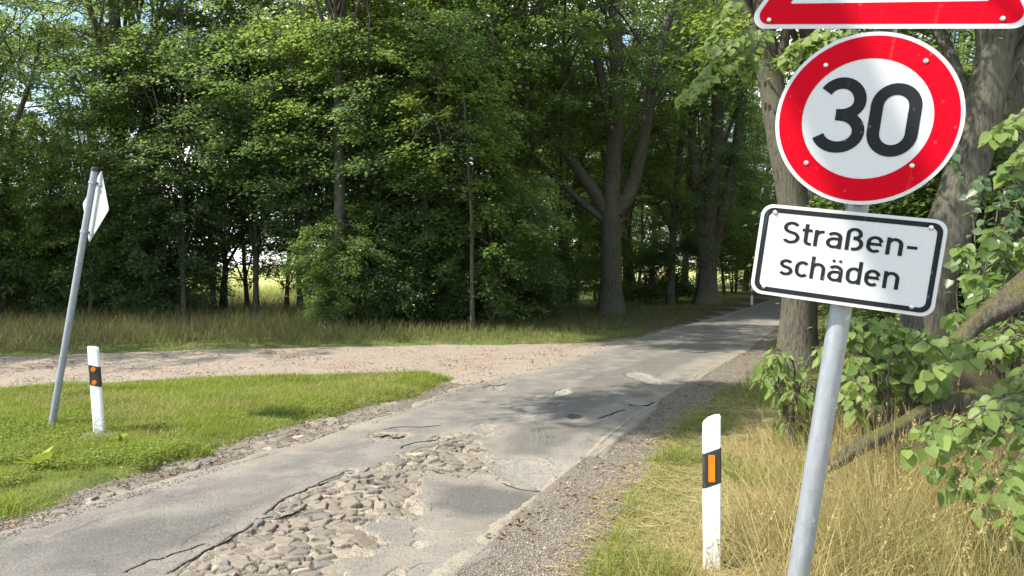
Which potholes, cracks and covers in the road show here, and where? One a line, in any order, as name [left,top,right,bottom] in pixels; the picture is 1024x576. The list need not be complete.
pothole [179,432,494,576]
crack [371,425,441,449]
crack [598,402,656,419]
crack [125,472,345,574]
